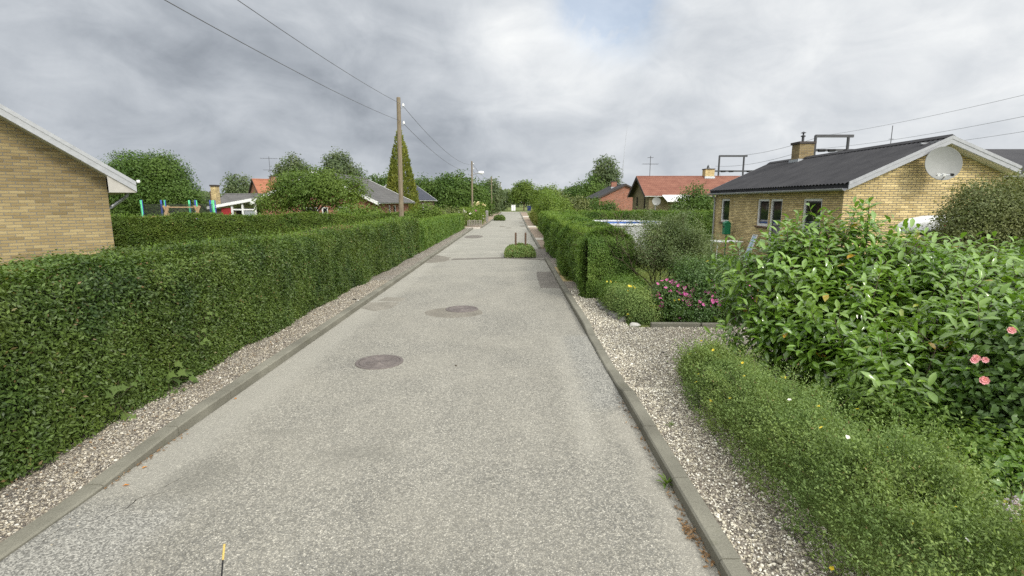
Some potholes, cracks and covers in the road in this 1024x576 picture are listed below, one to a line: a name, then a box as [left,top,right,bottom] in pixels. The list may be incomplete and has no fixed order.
manhole cover [355,355,403,370]
manhole cover [446,305,478,313]
